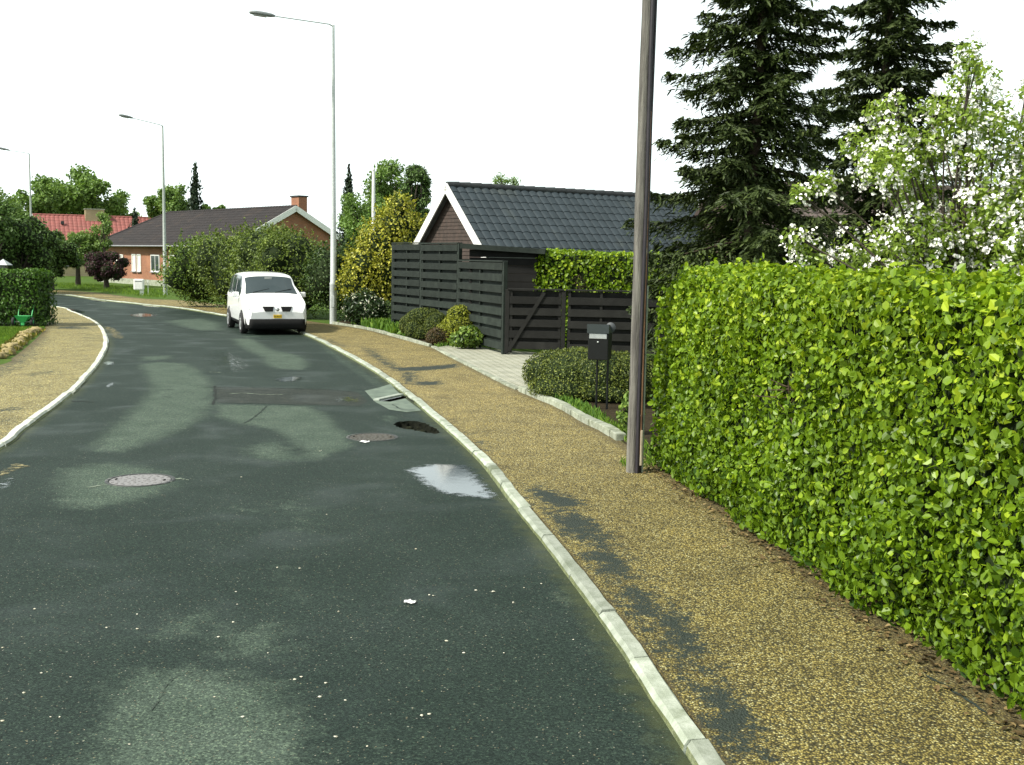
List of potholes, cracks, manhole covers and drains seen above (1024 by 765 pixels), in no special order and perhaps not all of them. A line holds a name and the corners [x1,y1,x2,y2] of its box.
pothole [394,421,440,434]
manhole cover [346,433,398,441]
manhole cover [104,473,175,487]
crack [212,386,355,423]
drain grate [373,393,406,402]
